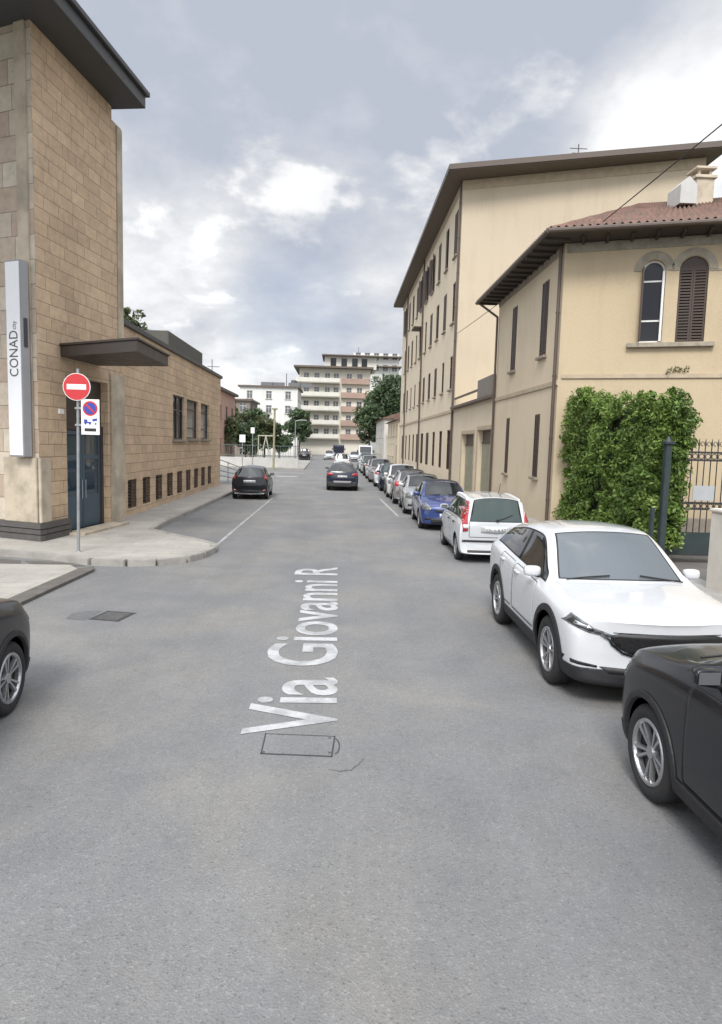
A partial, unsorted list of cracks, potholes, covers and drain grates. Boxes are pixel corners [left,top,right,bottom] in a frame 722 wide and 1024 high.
manhole cover [66,611,136,622]
manhole cover [260,733,340,757]
